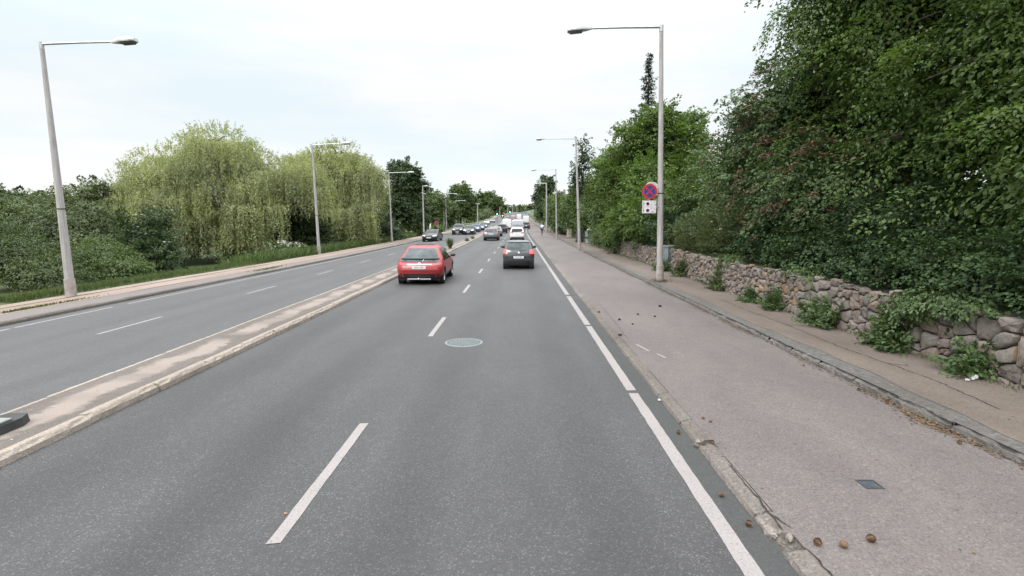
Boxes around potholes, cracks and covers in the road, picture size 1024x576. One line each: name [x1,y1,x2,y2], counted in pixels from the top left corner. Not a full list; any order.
manhole cover [445,338,483,347]
utility cover [855,479,885,489]
